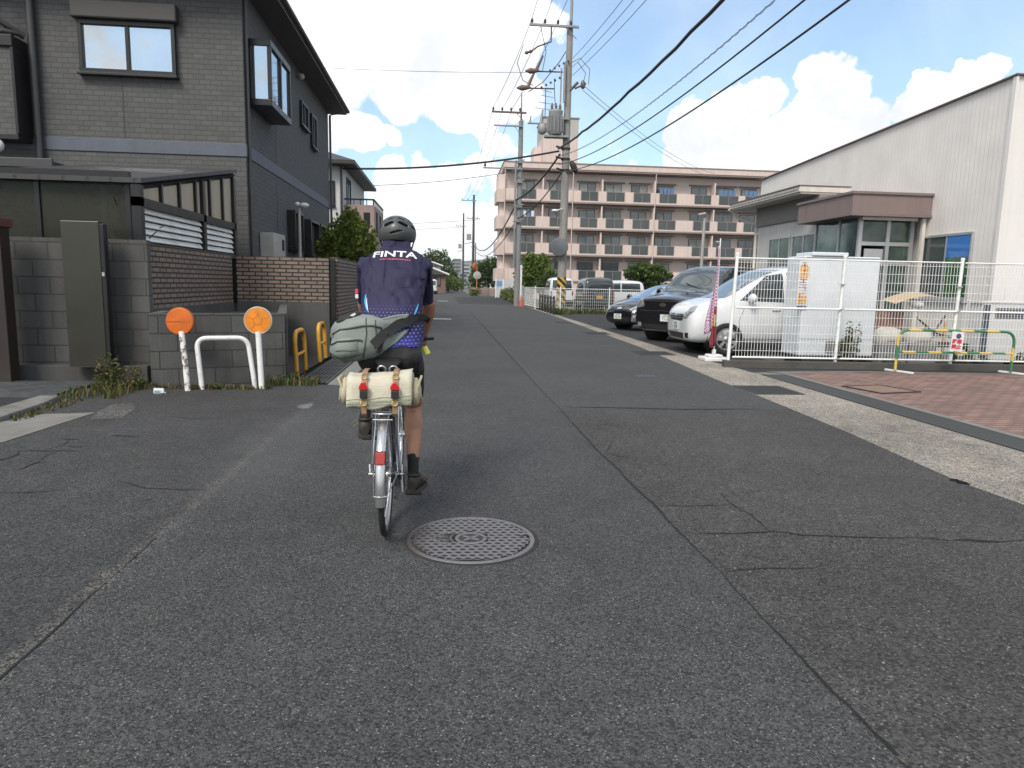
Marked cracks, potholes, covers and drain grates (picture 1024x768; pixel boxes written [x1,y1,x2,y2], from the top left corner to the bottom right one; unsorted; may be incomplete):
manhole cover [841,384,921,394]
crack [0,438,86,470]
manhole cover [402,516,539,566]
crack [465,308,1016,768]
